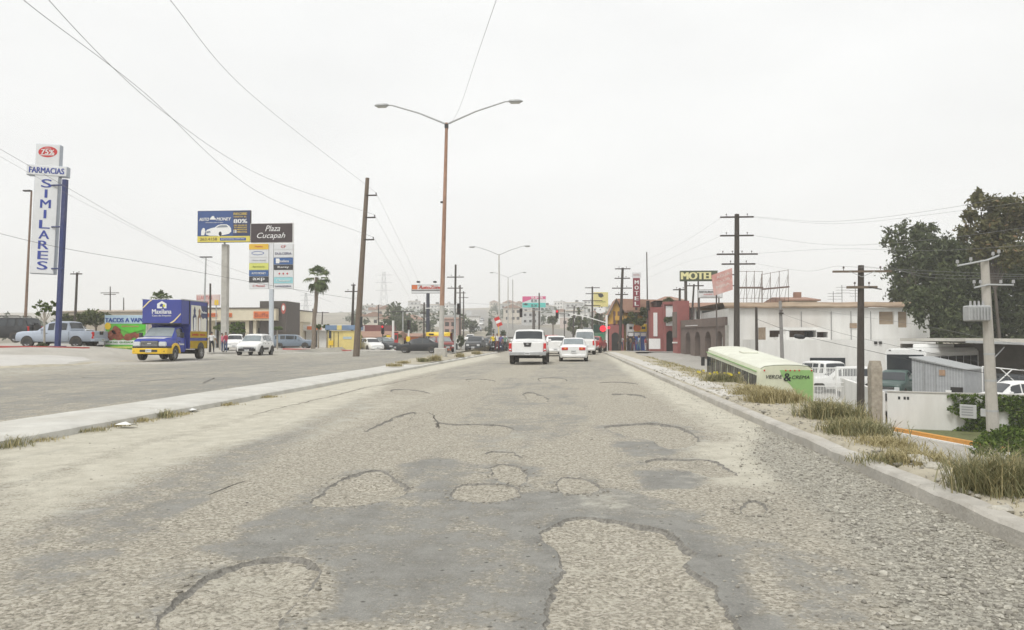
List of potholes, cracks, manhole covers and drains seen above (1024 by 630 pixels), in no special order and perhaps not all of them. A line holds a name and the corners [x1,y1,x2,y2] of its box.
pothole [604,423,700,449]
pothole [449,483,521,502]
pothole [555,477,601,494]
pothole [645,458,738,478]
pothole [490,464,529,485]
pothole [155,556,322,630]
pothole [310,470,411,507]
pothole [522,392,549,403]
pothole [539,517,742,630]
